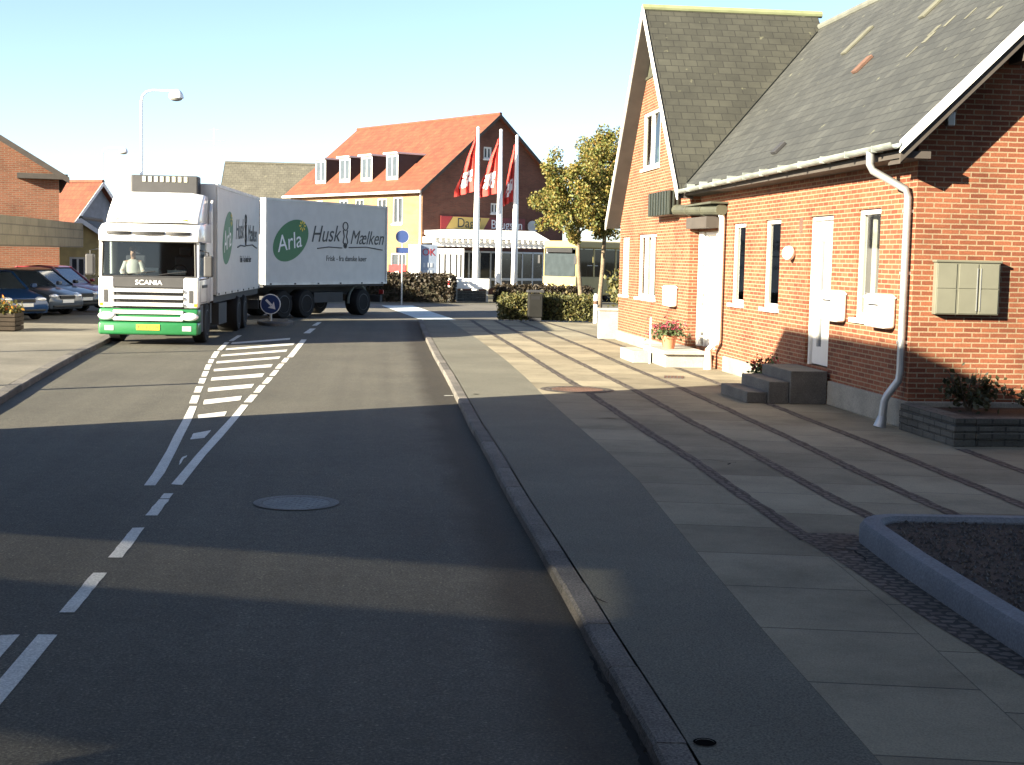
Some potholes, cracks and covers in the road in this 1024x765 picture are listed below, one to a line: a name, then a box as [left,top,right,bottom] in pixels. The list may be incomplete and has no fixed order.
manhole cover [253,495,339,510]
